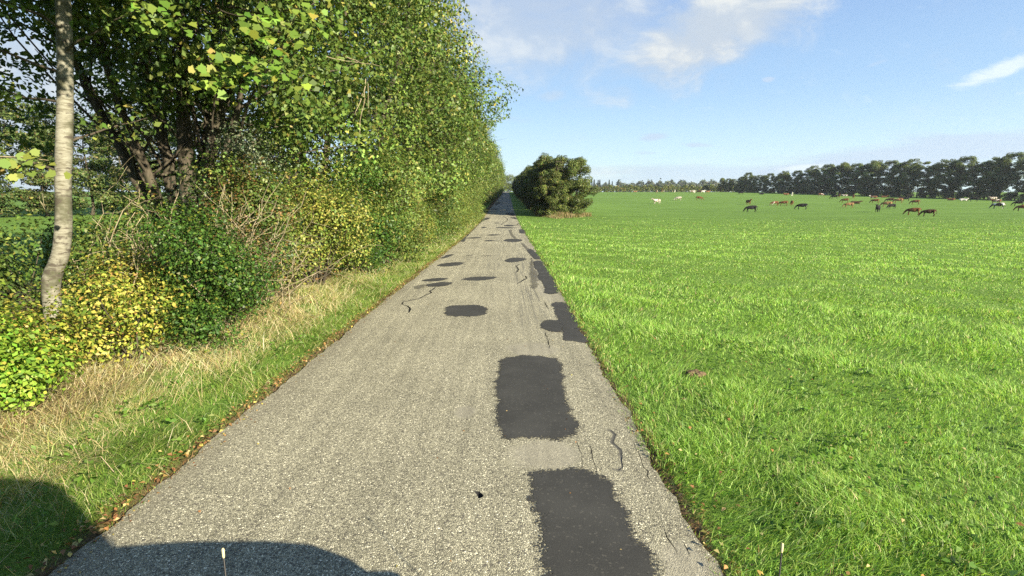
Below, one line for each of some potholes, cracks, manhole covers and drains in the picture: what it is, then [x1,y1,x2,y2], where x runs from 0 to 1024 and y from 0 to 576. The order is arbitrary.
crack [577,423,650,479]
